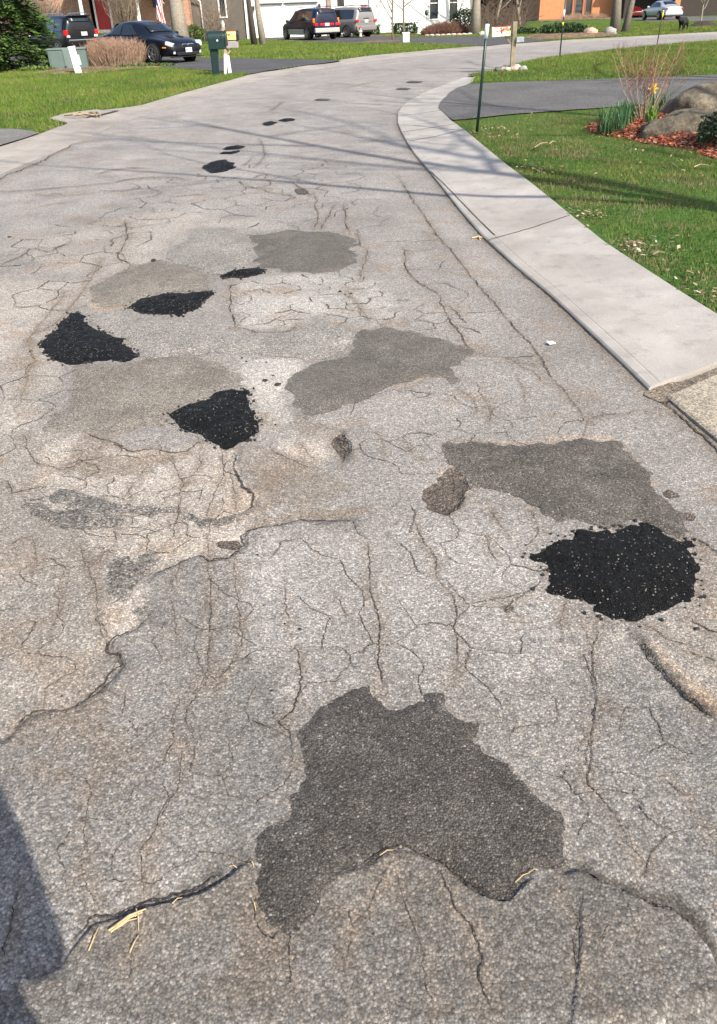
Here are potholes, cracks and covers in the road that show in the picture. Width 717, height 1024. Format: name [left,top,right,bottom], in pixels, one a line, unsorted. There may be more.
crack [330,843,520,1009]
pothole [331,435,350,458]
crack [339,381,649,474]
crack [510,604,717,877]
crack [561,870,697,973]
crack [0,139,551,977]
pothole [422,467,469,515]
